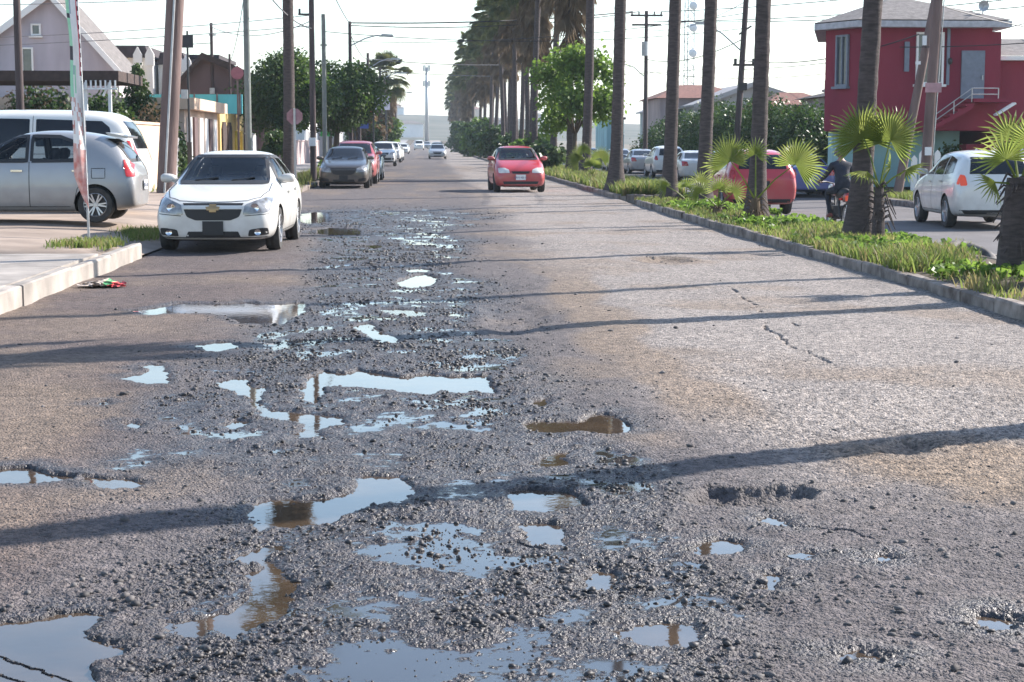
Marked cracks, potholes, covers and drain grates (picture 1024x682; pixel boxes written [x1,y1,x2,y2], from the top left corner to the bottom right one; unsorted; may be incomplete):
pothole [295,367,501,404]
pothole [75,472,148,489]
pothole [516,410,635,434]
crack [0,656,72,682]
pothole [238,471,427,538]
pothole [0,464,83,484]
crack [725,286,836,366]
pothole [156,539,310,642]
pothole [603,616,711,648]
pothole [677,483,826,507]
pothole [963,606,1024,631]
pothole [130,301,309,325]
